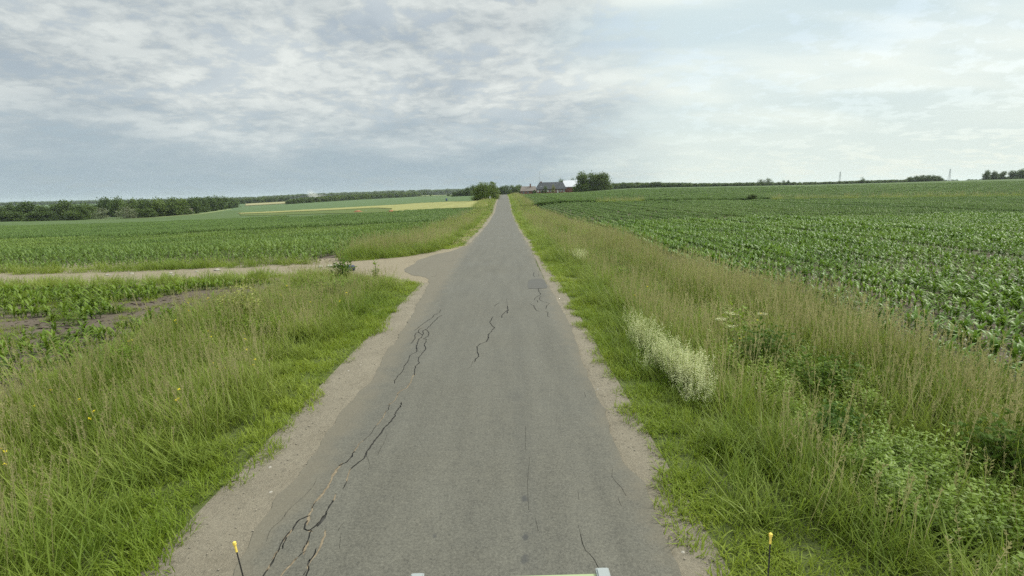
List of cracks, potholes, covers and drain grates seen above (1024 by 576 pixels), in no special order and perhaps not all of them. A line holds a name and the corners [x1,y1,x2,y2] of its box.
crack [263,310,442,576]
crack [468,299,509,369]
